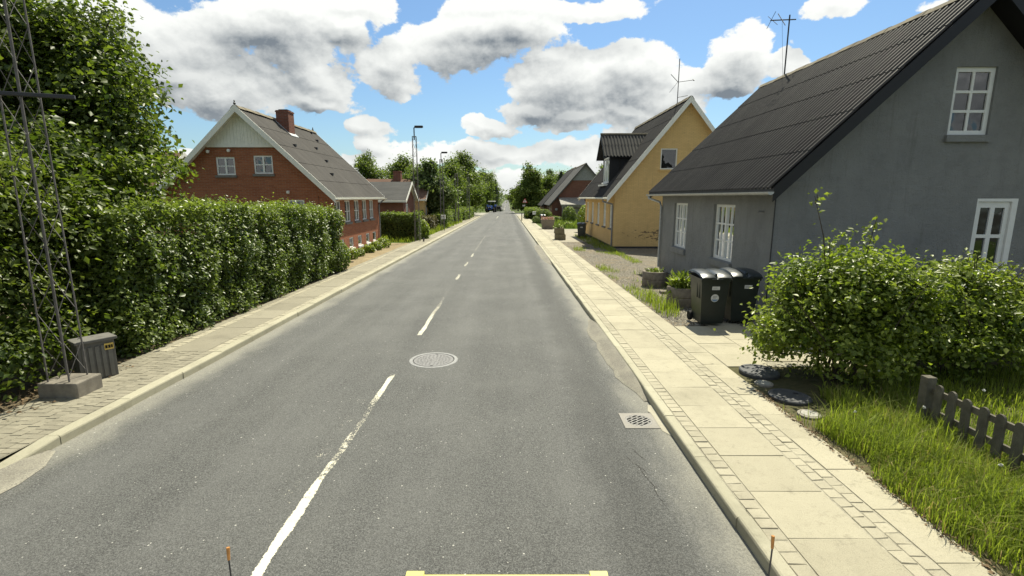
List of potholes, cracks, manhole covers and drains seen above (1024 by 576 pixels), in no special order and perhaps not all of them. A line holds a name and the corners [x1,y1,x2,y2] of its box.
manhole cover [409,352,458,368]
drain grate [618,405,672,436]
